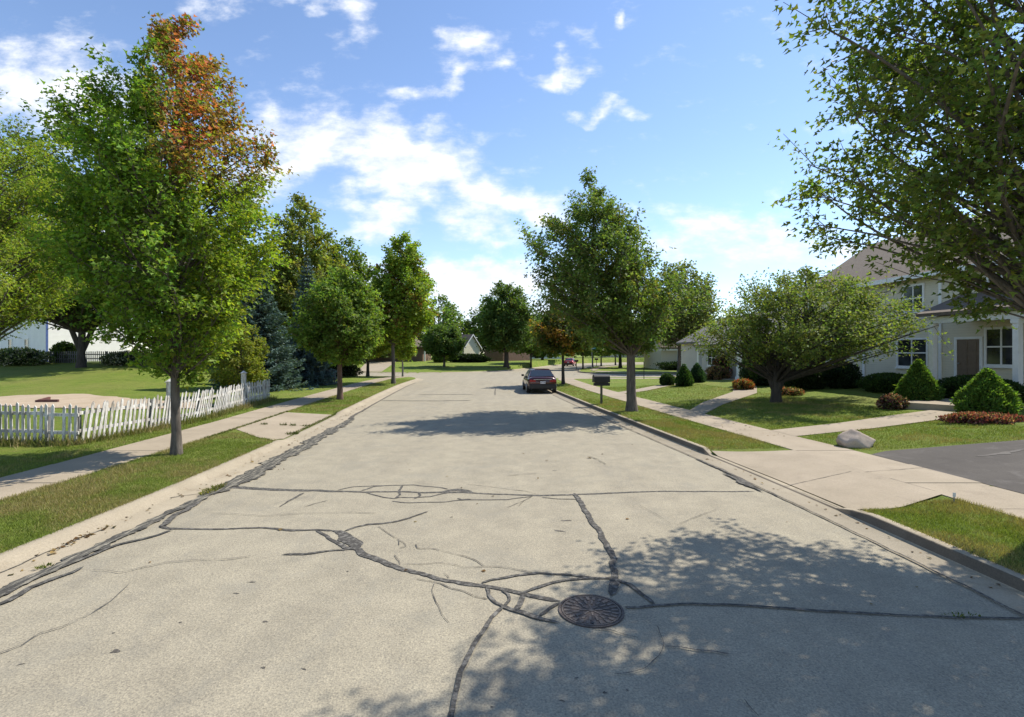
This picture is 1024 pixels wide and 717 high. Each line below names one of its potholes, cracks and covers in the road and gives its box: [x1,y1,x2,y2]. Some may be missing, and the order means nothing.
crack [0,556,245,653]
crack [230,500,530,622]
manhole cover [558,594,624,628]
crack [615,625,729,674]
